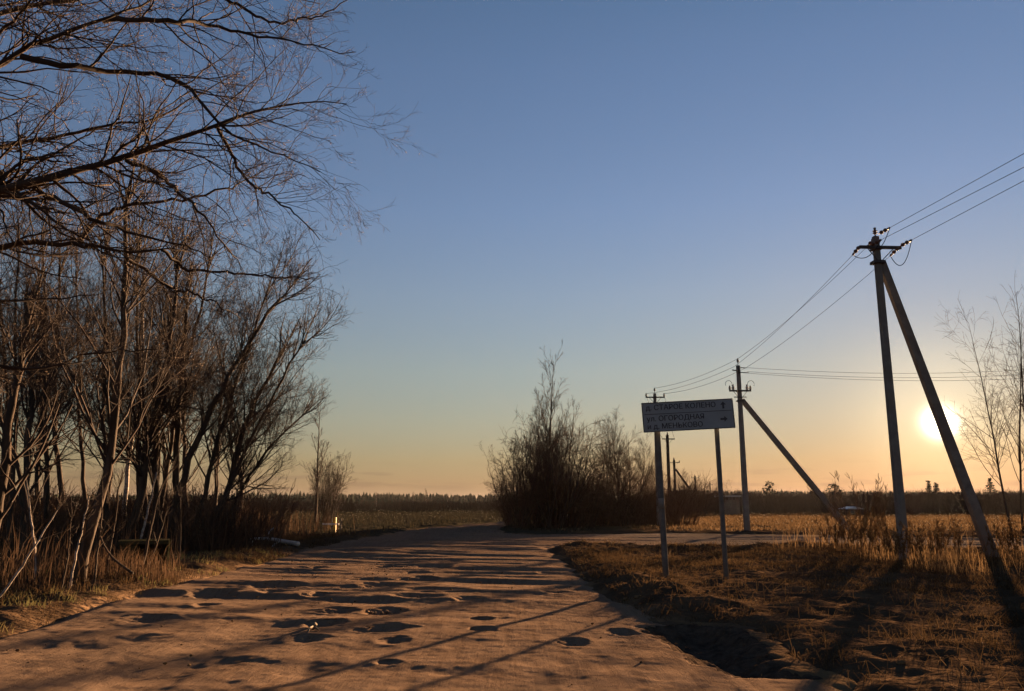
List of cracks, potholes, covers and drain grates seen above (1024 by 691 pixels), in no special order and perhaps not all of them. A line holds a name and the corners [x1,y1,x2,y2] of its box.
pothole [362,606,407,615]
pothole [377,636,412,645]
pothole [605,628,640,636]
pothole [184,588,246,599]
pothole [285,634,331,644]
pothole [116,613,184,625]
pothole [557,637,590,646]
